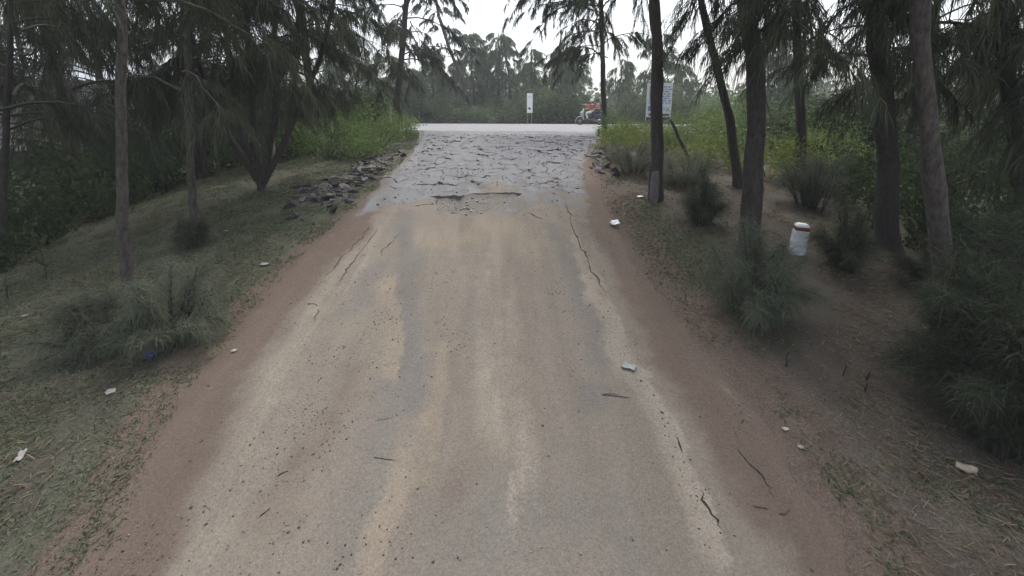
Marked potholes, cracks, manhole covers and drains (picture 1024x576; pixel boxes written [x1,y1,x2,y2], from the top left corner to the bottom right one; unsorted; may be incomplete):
crack [737,448,774,497]
crack [700,490,721,528]
crack [391,134,592,195]
crack [565,205,605,291]
crack [327,228,396,281]
pothole [431,192,521,216]
